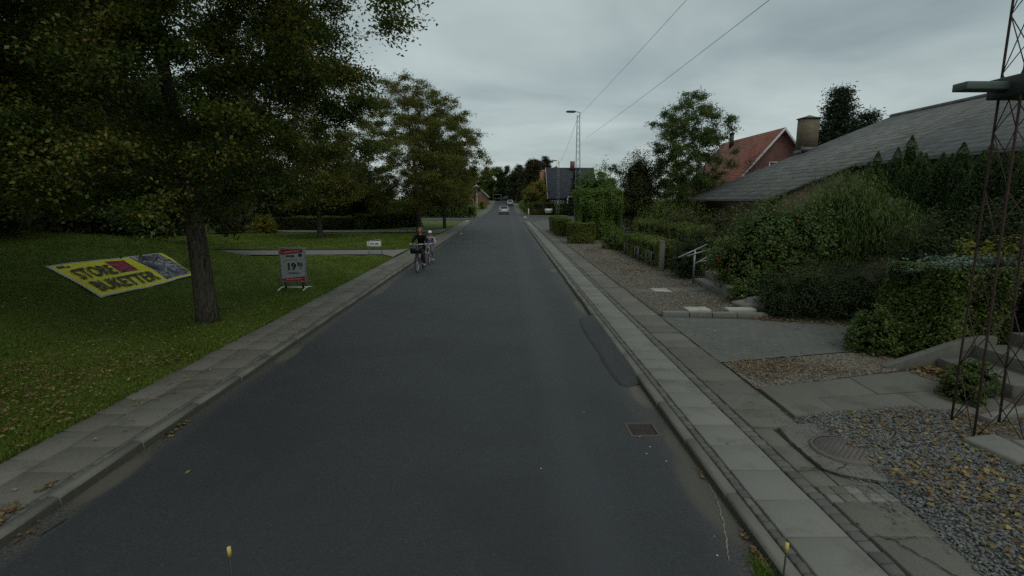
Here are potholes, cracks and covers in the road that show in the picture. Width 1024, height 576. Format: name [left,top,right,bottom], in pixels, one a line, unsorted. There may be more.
crack [708,483,729,559]
manhole cover [809,434,880,466]
drain grate [624,422,661,437]
